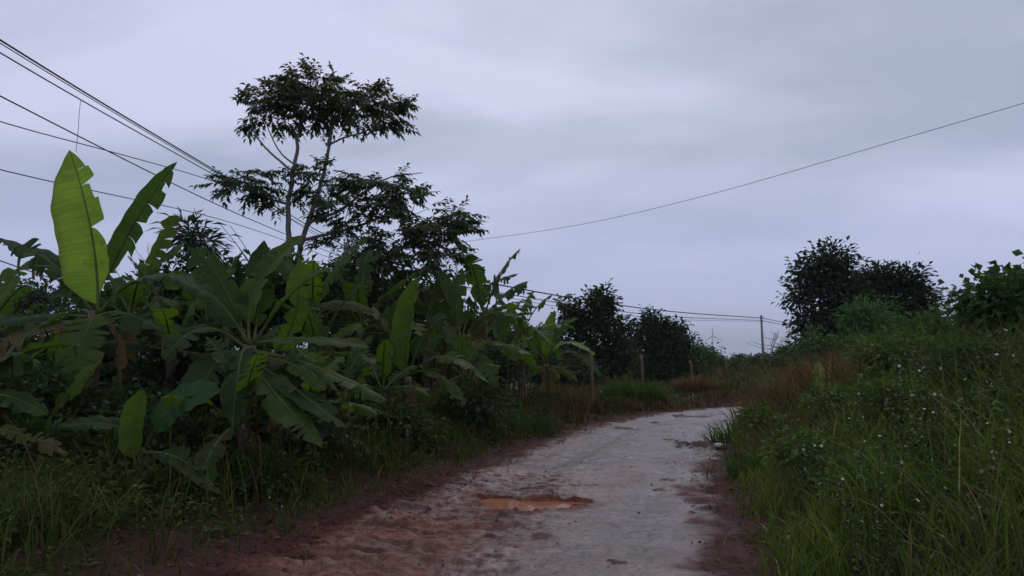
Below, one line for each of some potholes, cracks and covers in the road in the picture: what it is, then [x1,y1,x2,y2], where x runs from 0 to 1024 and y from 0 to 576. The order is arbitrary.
pothole [474,493,594,513]
